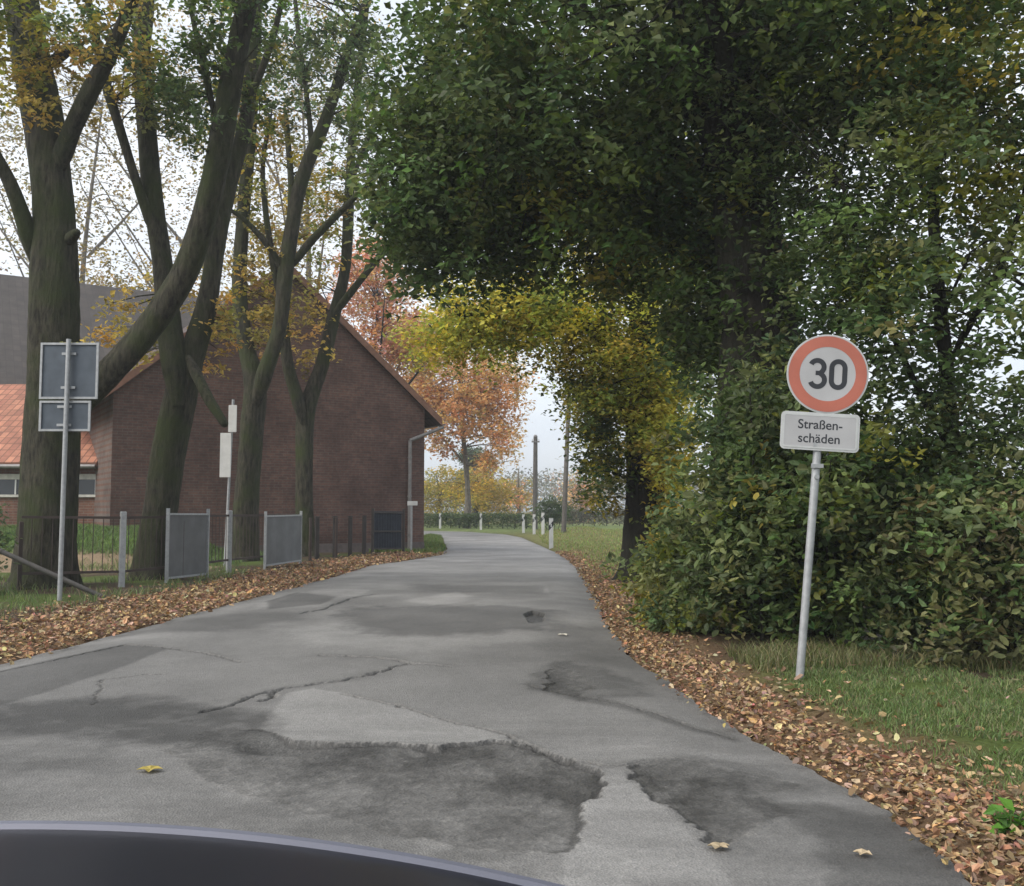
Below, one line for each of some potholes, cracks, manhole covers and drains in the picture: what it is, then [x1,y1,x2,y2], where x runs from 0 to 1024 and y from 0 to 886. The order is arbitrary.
pothole [522,610,548,623]
crack [0,644,740,767]
crack [298,594,378,614]
